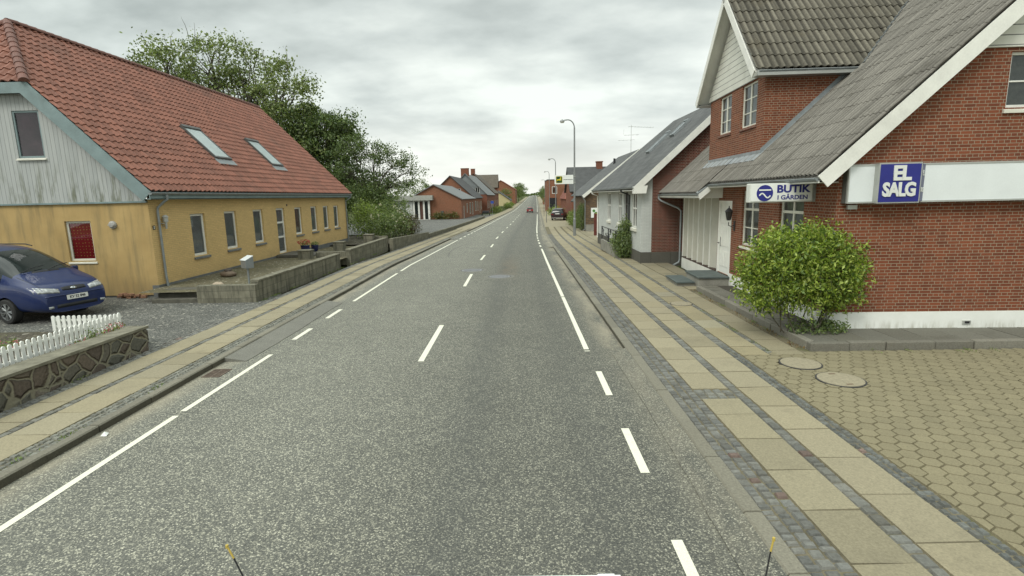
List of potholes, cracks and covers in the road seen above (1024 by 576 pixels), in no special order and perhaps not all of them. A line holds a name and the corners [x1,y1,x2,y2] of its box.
manhole cover [815,372,867,388]
manhole cover [779,357,823,370]
drain grate [201,369,232,378]
